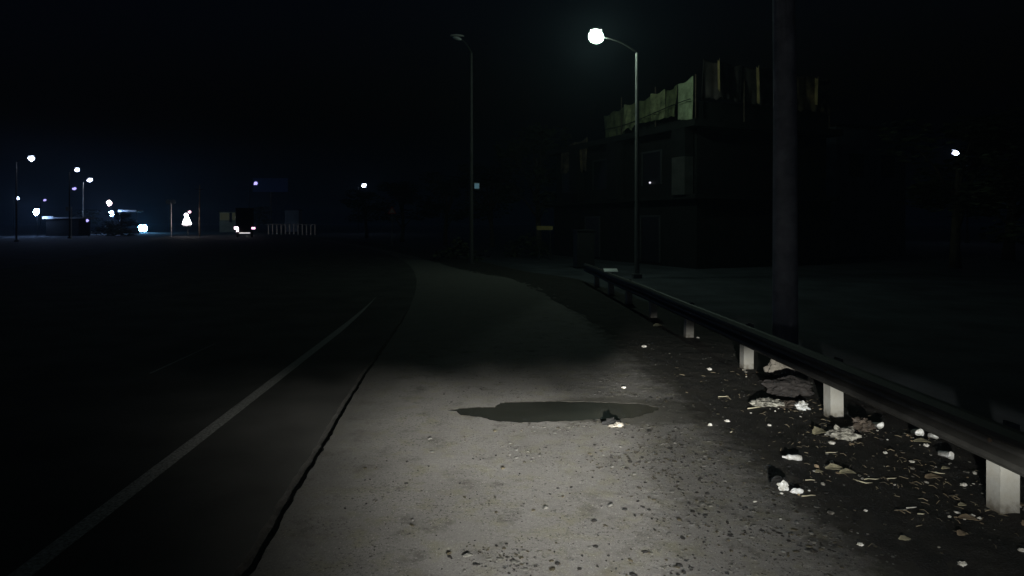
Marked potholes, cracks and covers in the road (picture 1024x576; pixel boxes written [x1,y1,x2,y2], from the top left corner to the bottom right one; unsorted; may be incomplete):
crack [233,309,409,576]
pothole [449,401,659,423]
